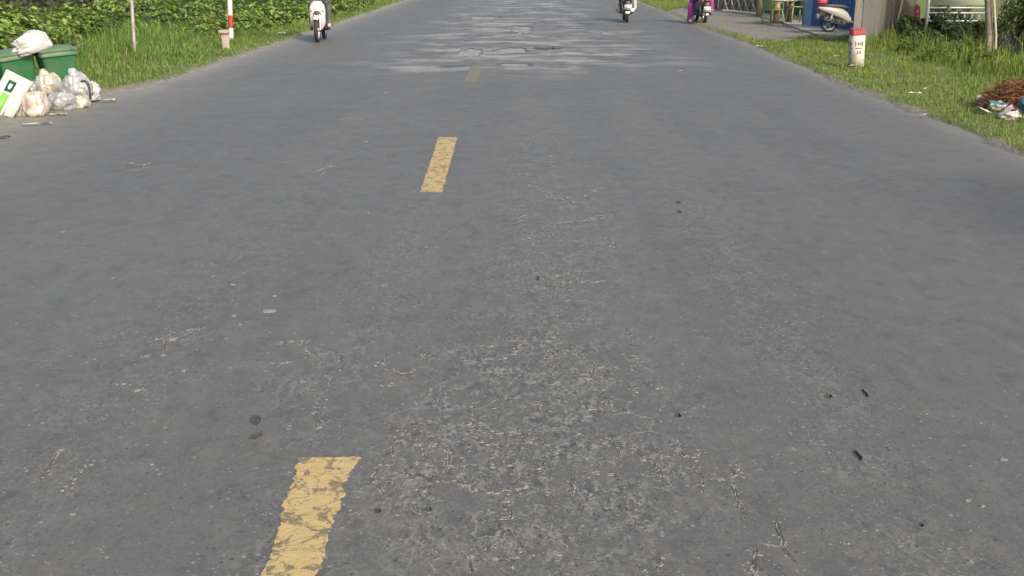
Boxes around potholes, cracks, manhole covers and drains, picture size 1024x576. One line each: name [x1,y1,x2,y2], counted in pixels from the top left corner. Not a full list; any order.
crack [41,448,94,491]
pothole [510,26,533,34]
pothole [457,48,483,57]
crack [520,184,619,250]
crack [364,327,754,576]
